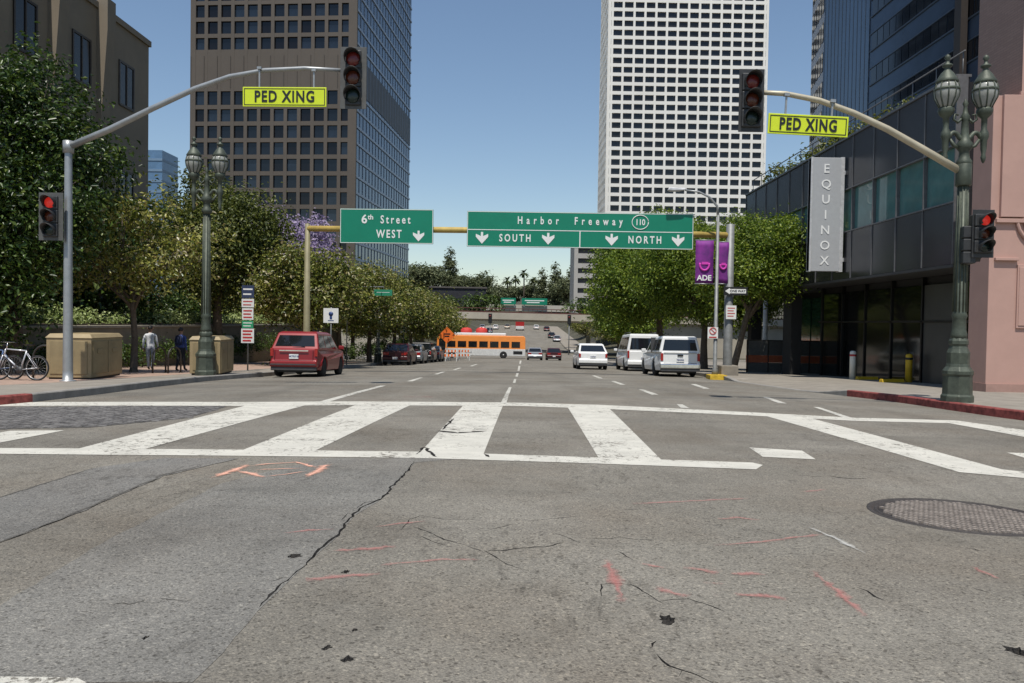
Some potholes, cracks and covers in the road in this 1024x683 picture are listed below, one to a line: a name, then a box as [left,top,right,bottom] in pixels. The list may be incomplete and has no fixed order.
crack [600,583,723,611]
manhole cover [866,498,1024,537]
pothole [1002,645,1024,656]
crack [651,641,713,683]
crack [260,447,580,606]
pothole [658,614,675,625]
